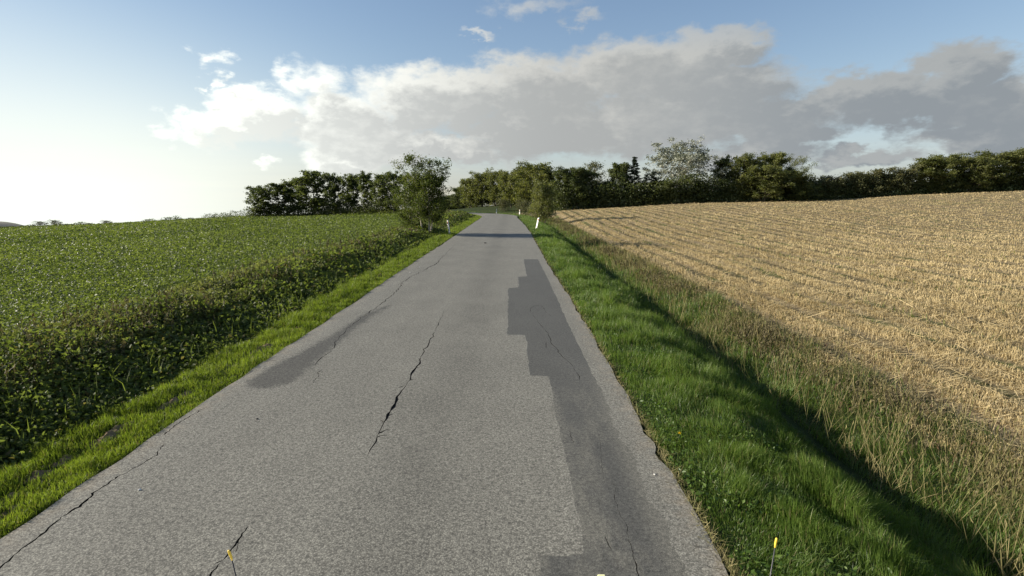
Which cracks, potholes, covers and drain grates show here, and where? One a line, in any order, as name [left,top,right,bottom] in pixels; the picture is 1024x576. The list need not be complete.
crack [312,247,453,385]
crack [367,309,445,456]
crack [209,527,248,576]
crack [600,443,639,576]
crack [0,408,204,568]
